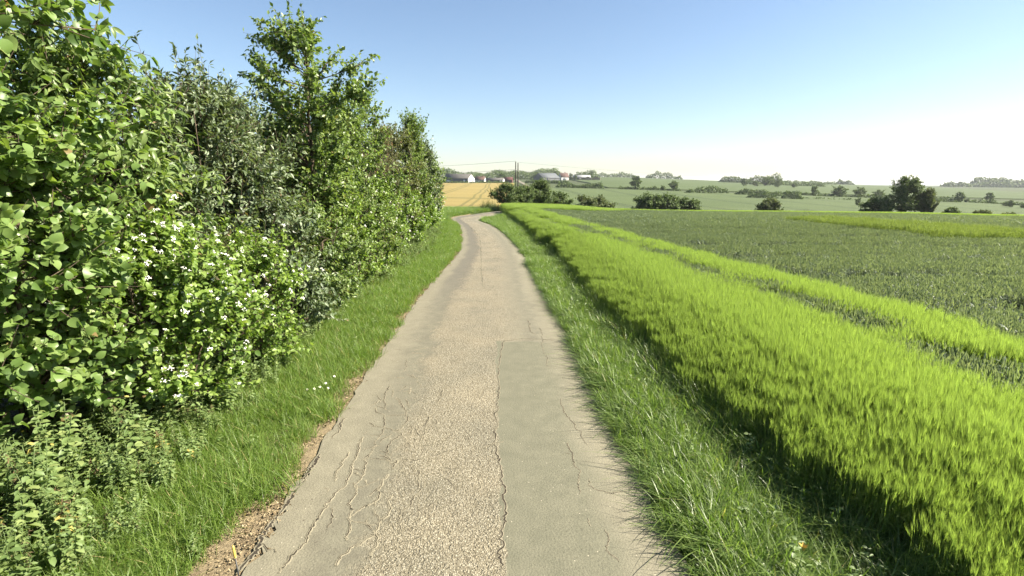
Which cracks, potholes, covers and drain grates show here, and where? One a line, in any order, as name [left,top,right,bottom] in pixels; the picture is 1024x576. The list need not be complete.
crack [560,398,625,494]
crack [527,319,548,366]
crack [588,519,619,562]
crack [236,325,504,574]
